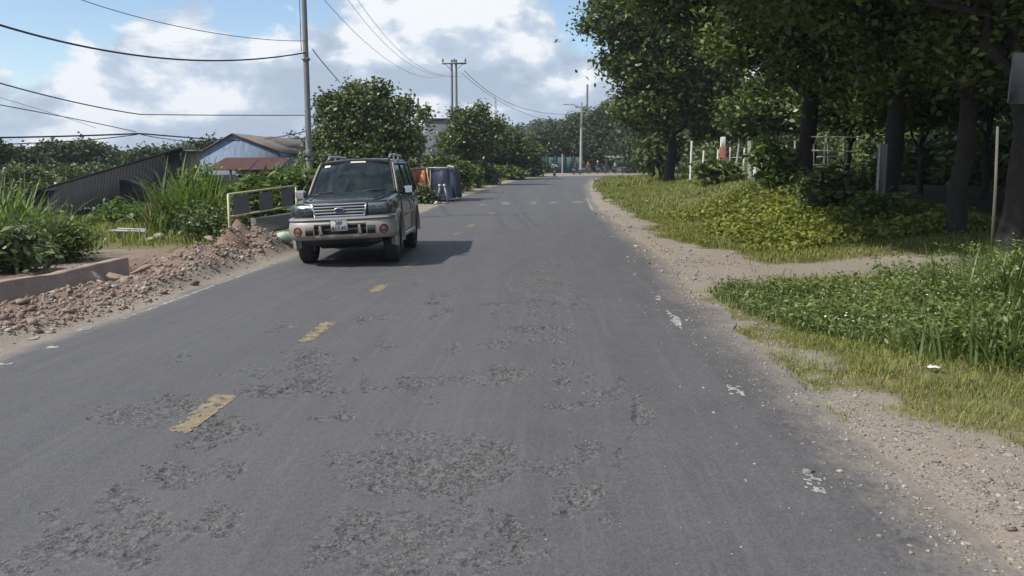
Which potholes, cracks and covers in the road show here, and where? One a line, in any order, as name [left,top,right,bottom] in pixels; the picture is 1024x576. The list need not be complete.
pothole [455,363,535,386]
pothole [627,395,659,441]
pothole [548,479,621,527]
